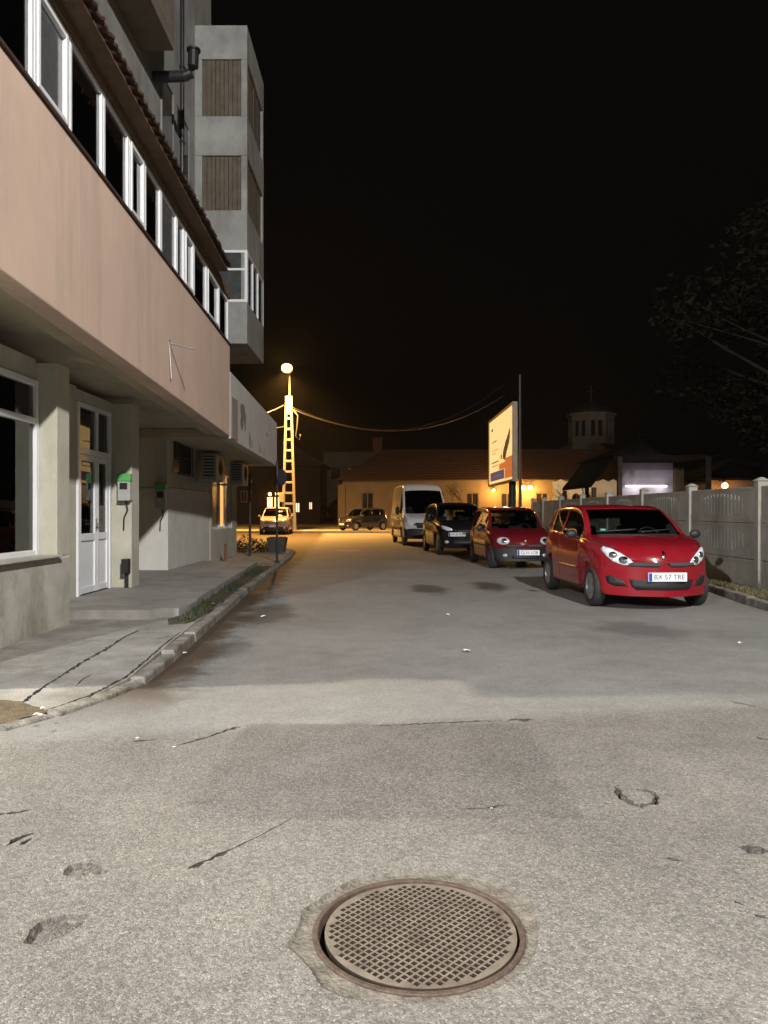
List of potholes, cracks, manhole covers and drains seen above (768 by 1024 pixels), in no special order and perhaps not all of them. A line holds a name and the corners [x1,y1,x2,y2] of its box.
pothole [23,914,87,946]
crack [132,726,241,746]
pothole [739,845,768,854]
manhole cover [285,871,540,1004]
crack [187,818,292,869]
pothole [614,787,660,809]
pothole [63,862,108,878]
crack [7,832,36,845]
